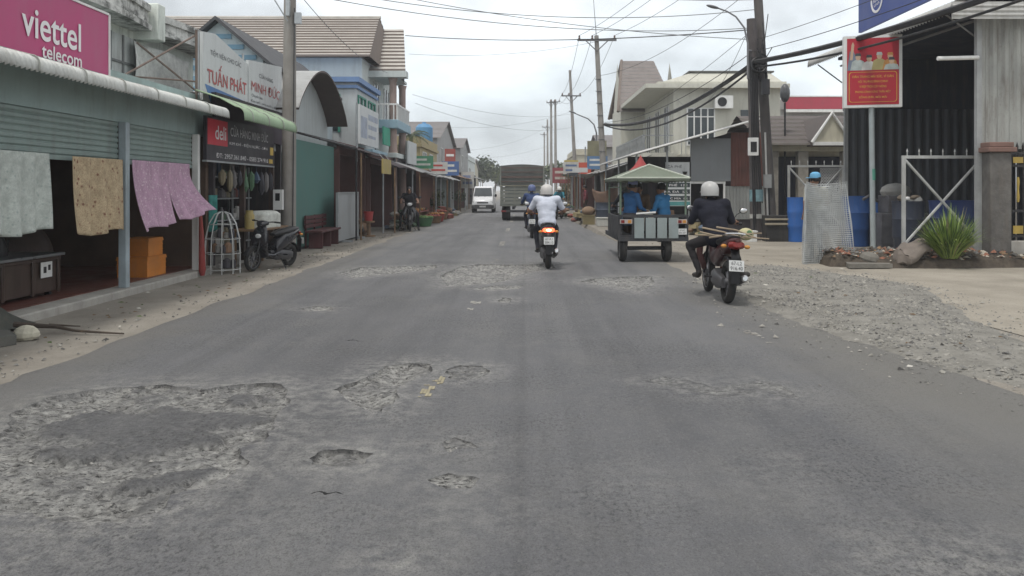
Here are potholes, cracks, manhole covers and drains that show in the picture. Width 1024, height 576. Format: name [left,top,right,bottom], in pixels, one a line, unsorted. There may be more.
pothole [309,449,373,467]
pothole [427,473,480,490]
pothole [333,363,432,411]
pothole [443,437,478,453]
pothole [445,365,490,381]
pothole [0,383,291,523]
